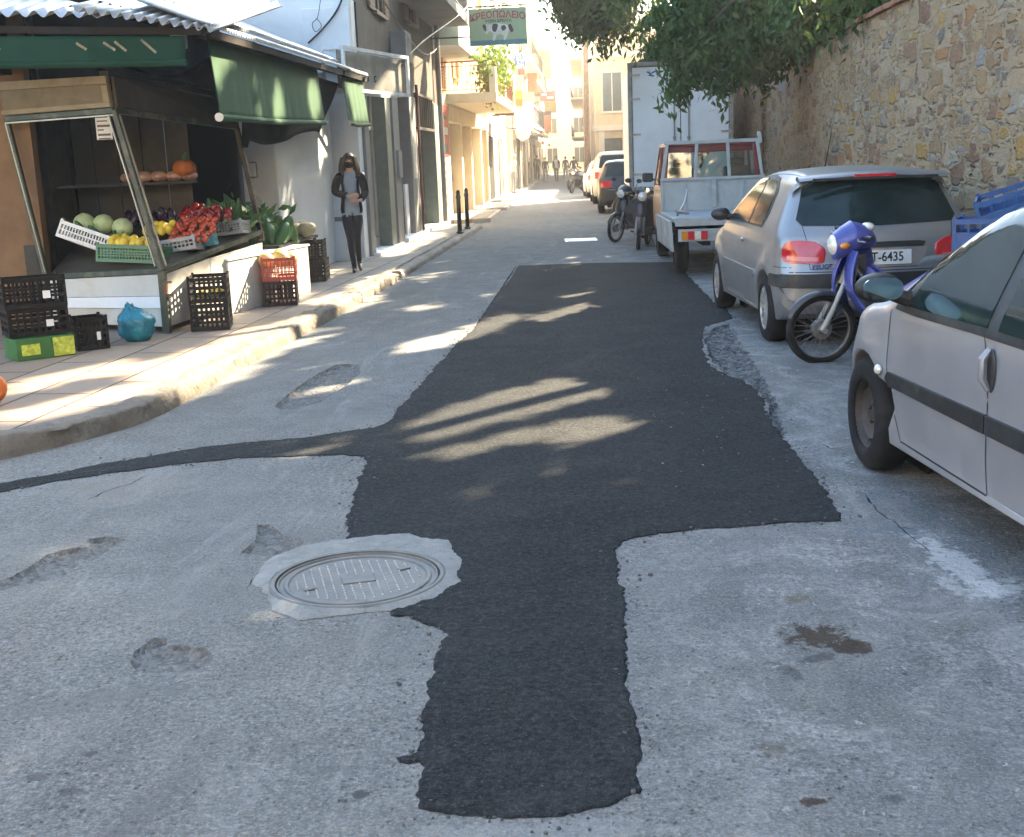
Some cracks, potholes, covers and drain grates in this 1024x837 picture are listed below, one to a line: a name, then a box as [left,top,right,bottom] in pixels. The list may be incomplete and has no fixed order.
pothole [130,638,213,673]
pothole [275,364,361,410]
crack [865,494,927,549]
manhole cover [252,533,462,620]
pothole [0,536,125,591]
pothole [240,524,303,558]
